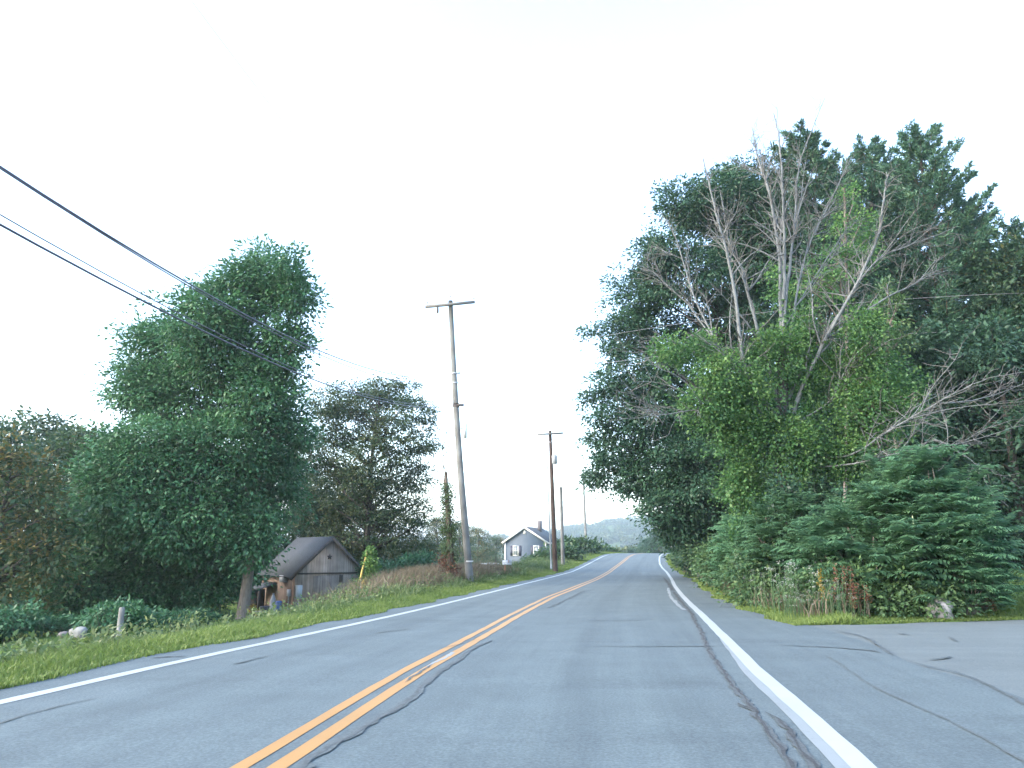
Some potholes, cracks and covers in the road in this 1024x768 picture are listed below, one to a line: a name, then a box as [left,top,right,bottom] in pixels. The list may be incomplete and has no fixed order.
crack [663,577,878,768]
crack [0,697,99,723]
crack [235,629,492,768]
